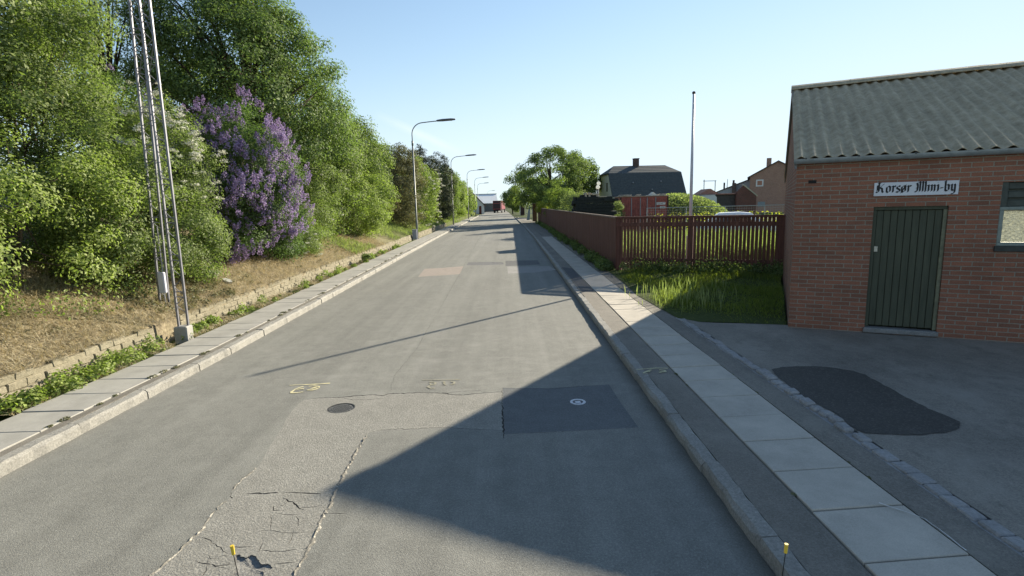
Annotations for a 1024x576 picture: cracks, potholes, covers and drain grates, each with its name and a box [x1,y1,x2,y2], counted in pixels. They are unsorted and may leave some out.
manhole cover [327,403,355,413]
crack [312,385,629,438]
crack [197,492,344,576]
